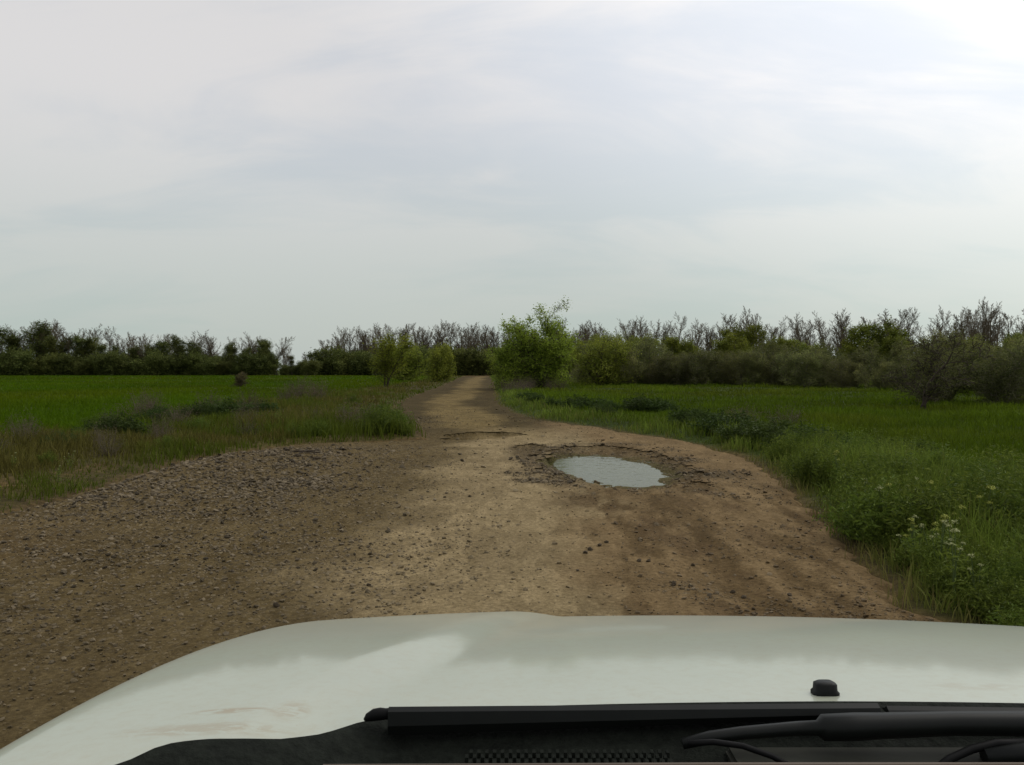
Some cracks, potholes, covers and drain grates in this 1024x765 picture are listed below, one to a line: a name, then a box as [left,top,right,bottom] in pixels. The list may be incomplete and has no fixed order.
pothole [511,444,554,458]
pothole [529,445,714,495]
pothole [440,432,527,440]
